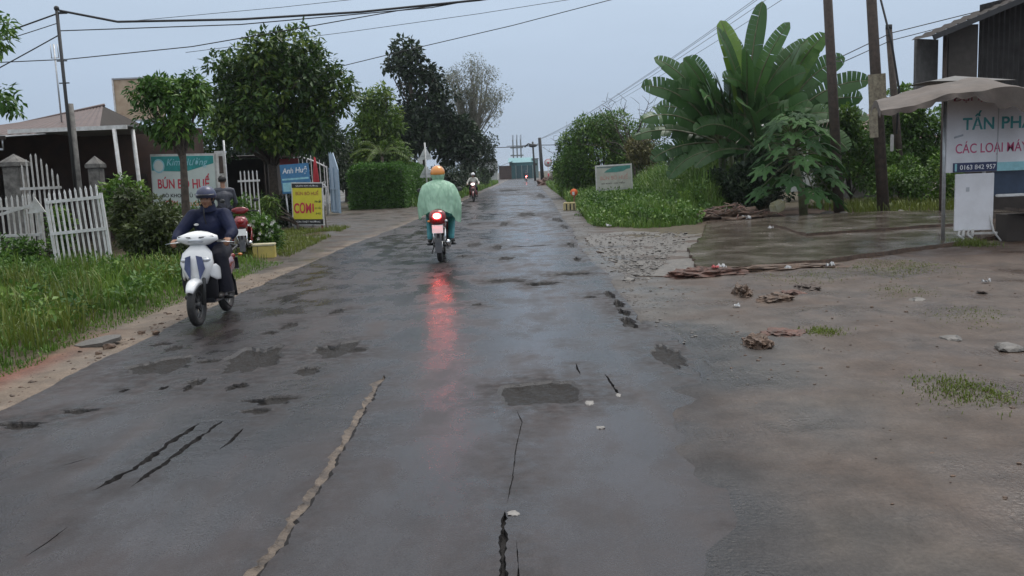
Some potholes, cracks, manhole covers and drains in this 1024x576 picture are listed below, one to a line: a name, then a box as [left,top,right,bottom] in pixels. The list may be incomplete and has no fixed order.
pothole [649,344,689,370]
pothole [124,355,198,375]
pothole [308,339,369,359]
crack [66,376,386,576]
pothole [182,378,207,392]
crack [498,511,520,576]
pothole [619,317,638,328]
pothole [240,395,301,406]
pothole [216,344,285,374]
pothole [224,382,250,392]
pothole [0,421,48,430]
